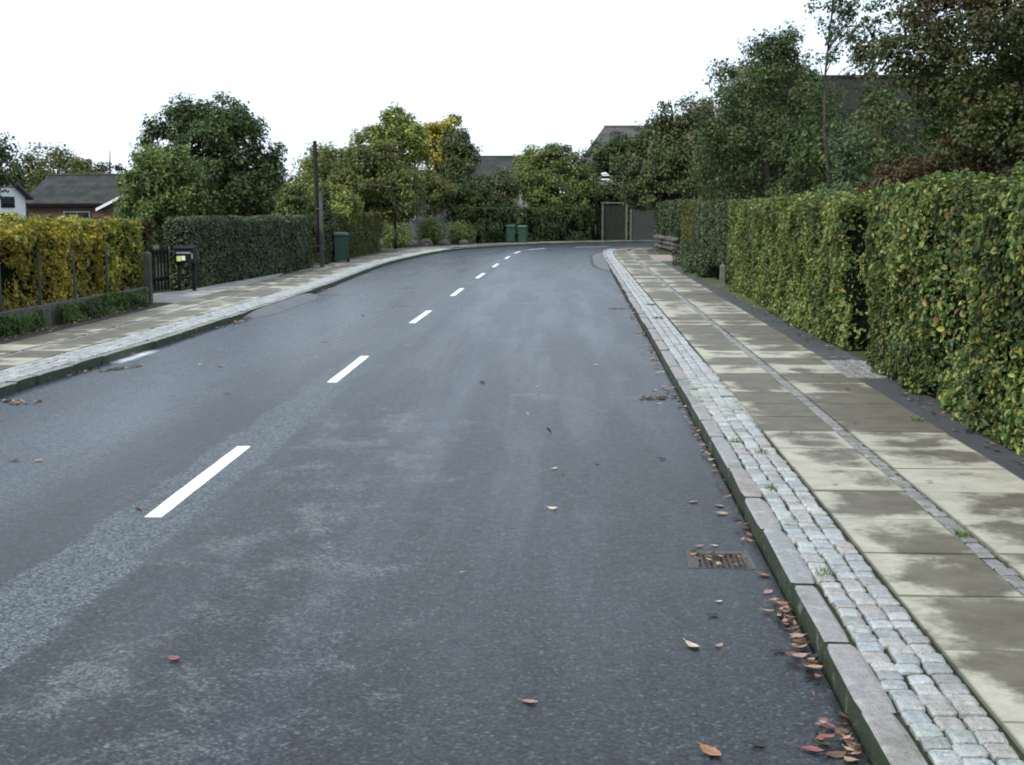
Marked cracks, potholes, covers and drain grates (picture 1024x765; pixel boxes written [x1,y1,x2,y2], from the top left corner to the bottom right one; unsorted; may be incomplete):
drain grate [684,550,756,569]
